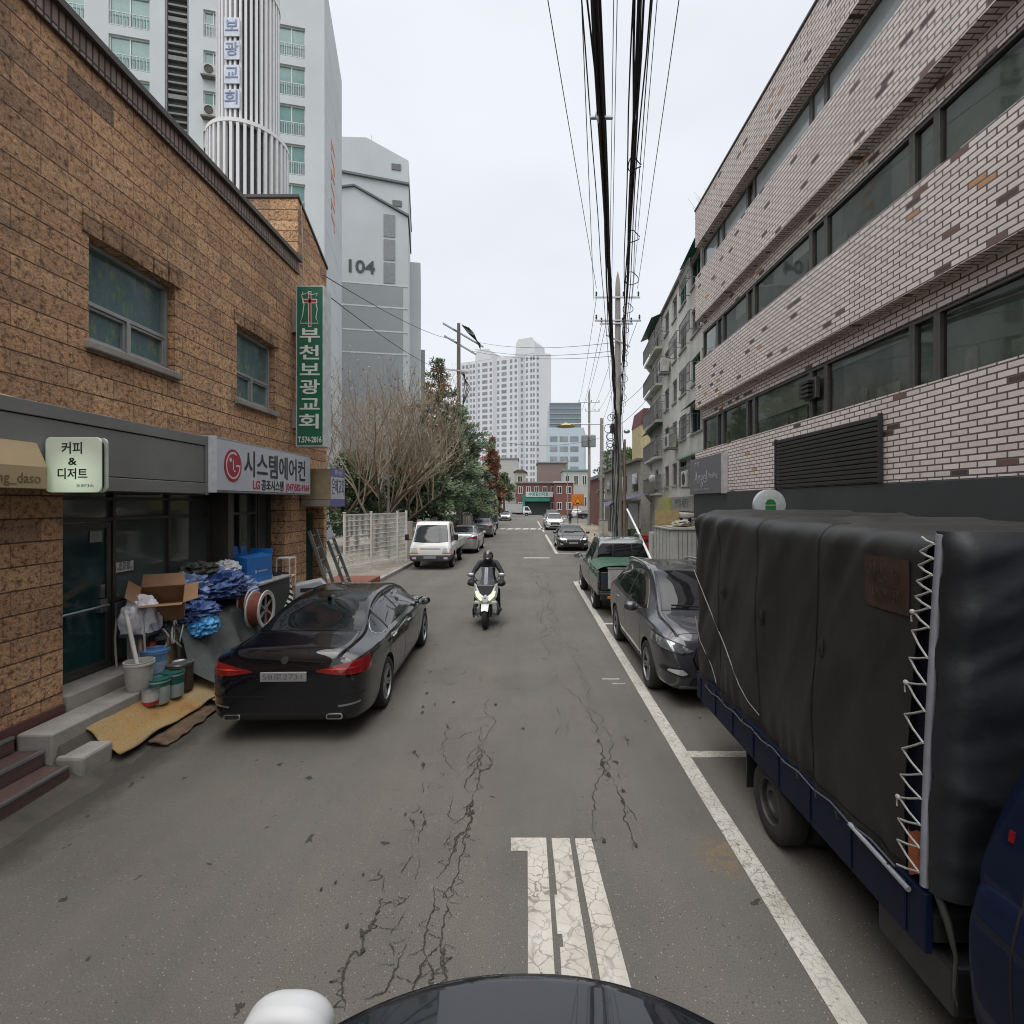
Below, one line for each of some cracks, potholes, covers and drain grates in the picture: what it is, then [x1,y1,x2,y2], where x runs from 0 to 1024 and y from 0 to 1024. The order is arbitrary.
crack [320,670,497,1010]
crack [565,688,638,848]
crack [518,556,590,704]
